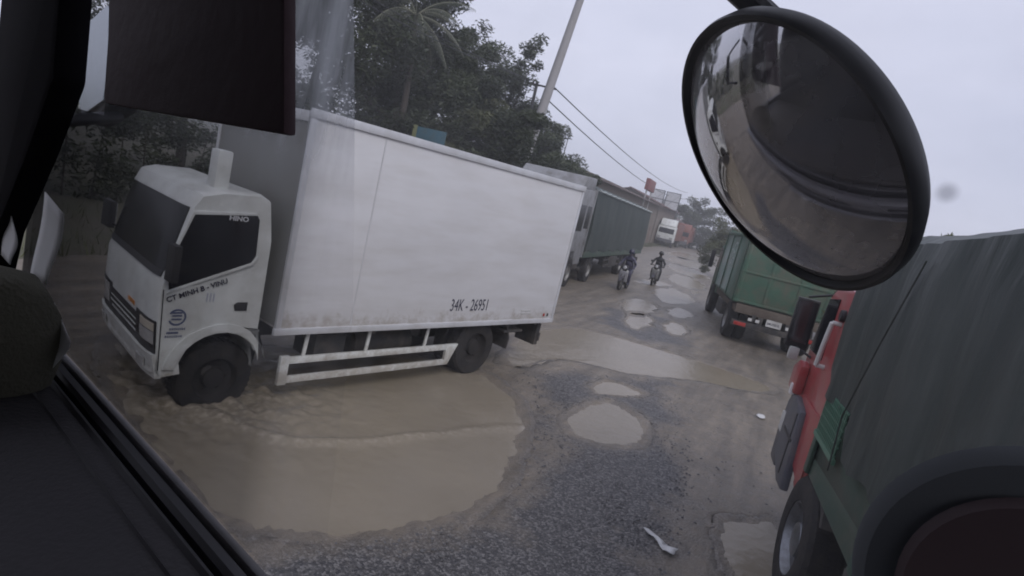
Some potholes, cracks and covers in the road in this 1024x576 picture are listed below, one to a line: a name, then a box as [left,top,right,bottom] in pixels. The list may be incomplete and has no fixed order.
pothole [586,378,650,398]
pothole [657,320,691,337]
pothole [663,306,697,320]
pothole [109,345,536,550]
pothole [647,286,699,305]
pothole [622,310,656,331]
pothole [617,297,660,318]
pothole [709,513,781,576]
pothole [492,325,785,394]
pothole [555,396,655,451]
